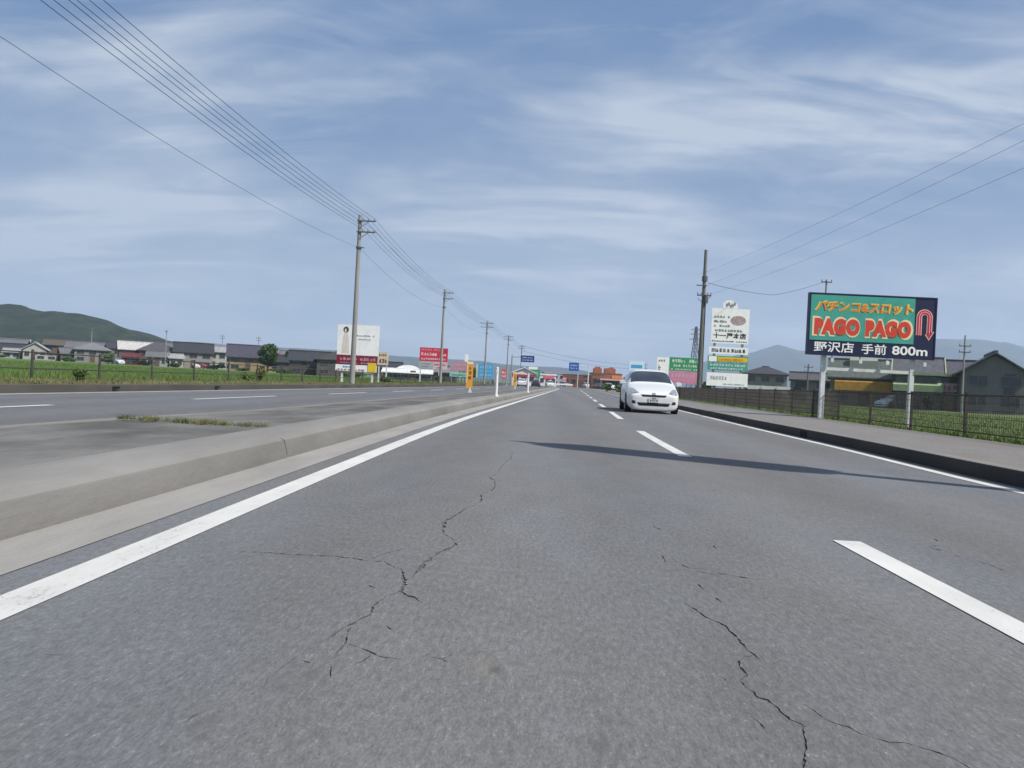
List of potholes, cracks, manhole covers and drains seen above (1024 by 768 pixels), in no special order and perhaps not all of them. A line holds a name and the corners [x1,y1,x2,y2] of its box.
crack [662,556,970,768]
crack [186,452,513,721]
